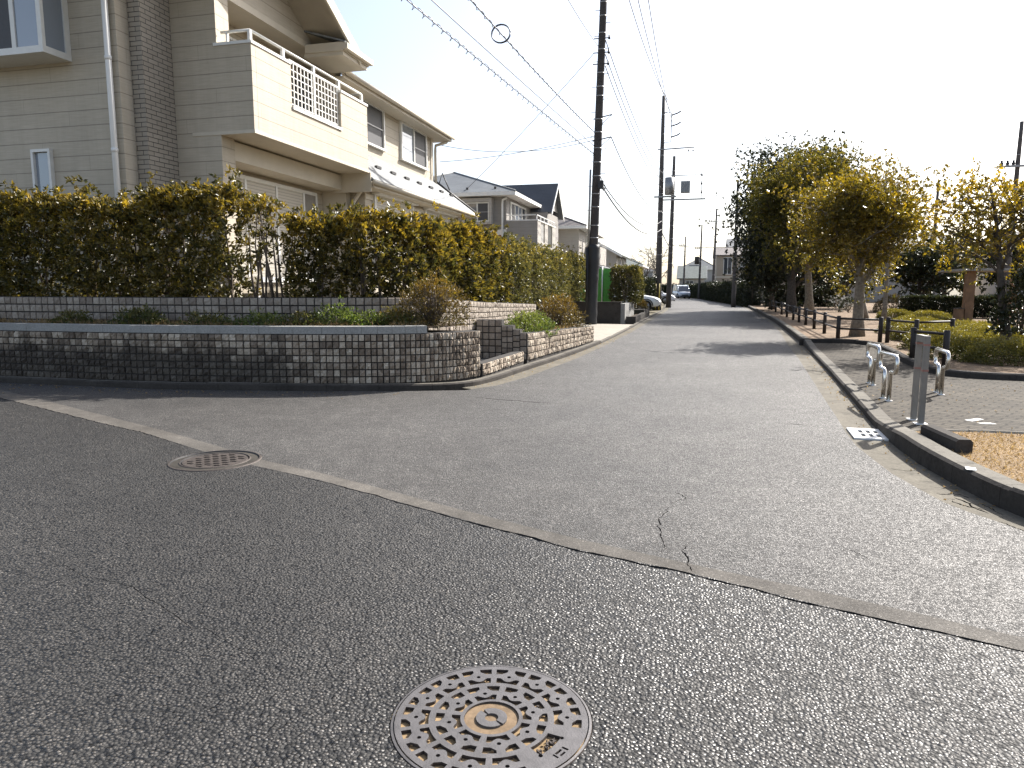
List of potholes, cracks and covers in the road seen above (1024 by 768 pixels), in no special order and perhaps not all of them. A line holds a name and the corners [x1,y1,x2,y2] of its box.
crack [62,564,262,664]
drain grate [846,427,889,441]
crack [936,493,1024,531]
manhole cover [390,665,593,768]
crack [657,492,692,571]
manhole cover [167,450,262,472]
